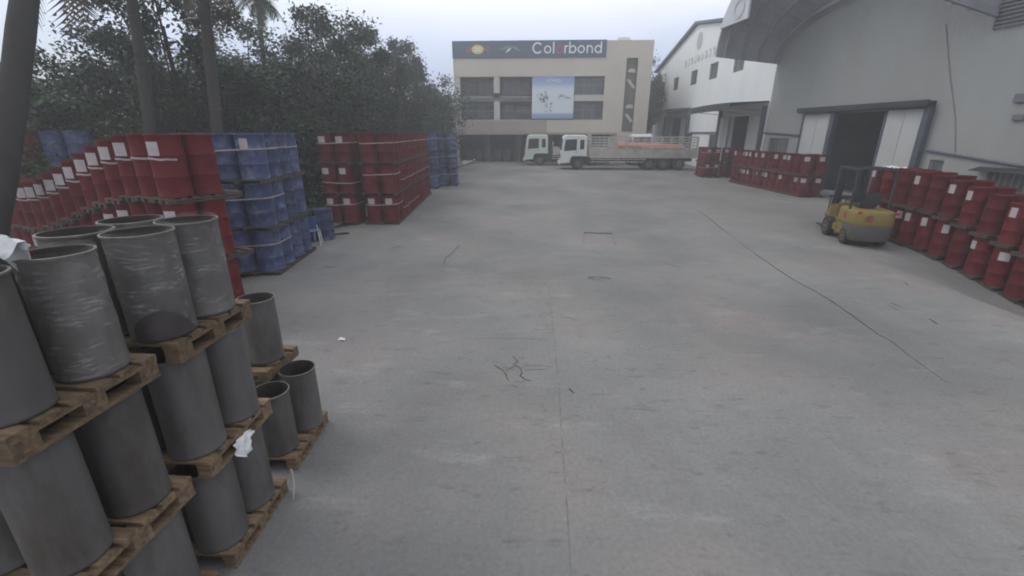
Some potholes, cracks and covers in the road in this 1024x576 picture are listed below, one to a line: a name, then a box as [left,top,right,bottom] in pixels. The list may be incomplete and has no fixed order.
manhole cover [583,232,616,246]
crack [495,357,549,387]
